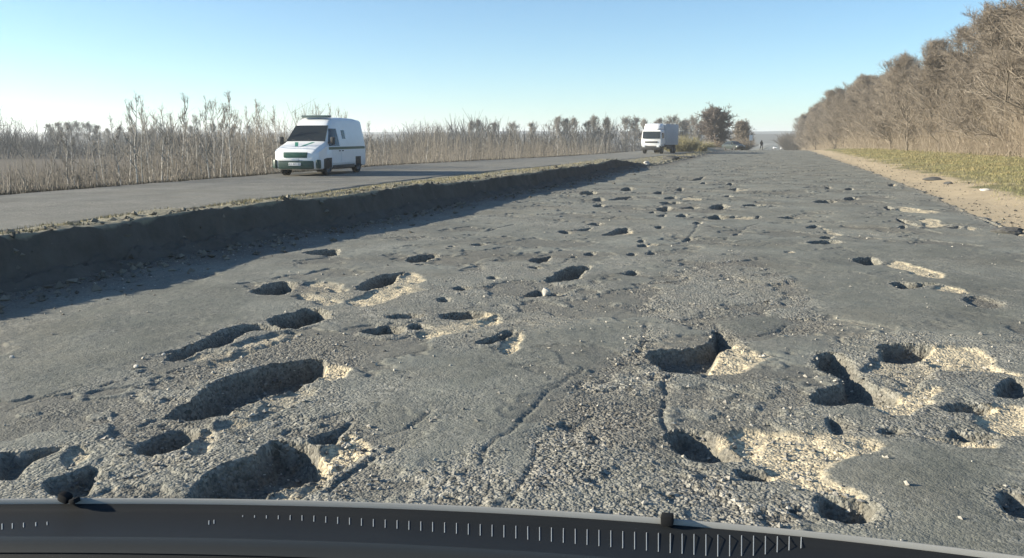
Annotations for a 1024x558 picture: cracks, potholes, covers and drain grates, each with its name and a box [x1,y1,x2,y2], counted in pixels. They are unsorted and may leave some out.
pothole [0,445,68,482]
pothole [356,272,407,291]
pothole [663,428,760,466]
pothole [164,323,288,362]
pothole [810,352,912,408]
pothole [544,265,593,283]
pothole [992,376,1024,399]
pothole [164,358,333,422]
pothole [647,329,746,376]
pothole [812,493,883,526]
pothole [875,343,946,365]
